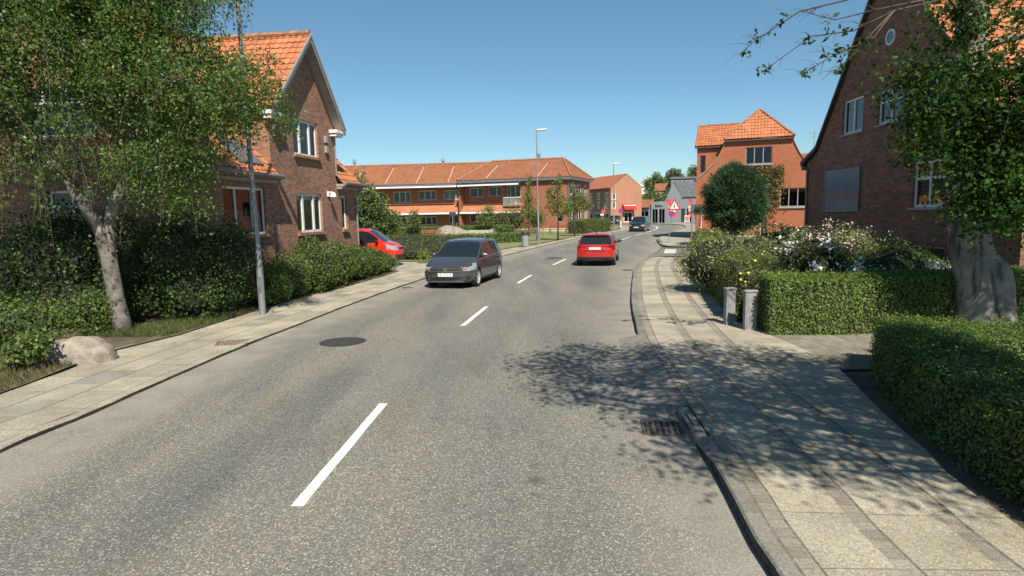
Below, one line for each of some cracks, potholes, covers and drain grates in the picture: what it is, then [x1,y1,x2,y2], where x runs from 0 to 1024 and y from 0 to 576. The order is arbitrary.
drain grate [640,420,686,436]
drain grate [677,407,709,444]
manhole cover [319,337,366,347]
